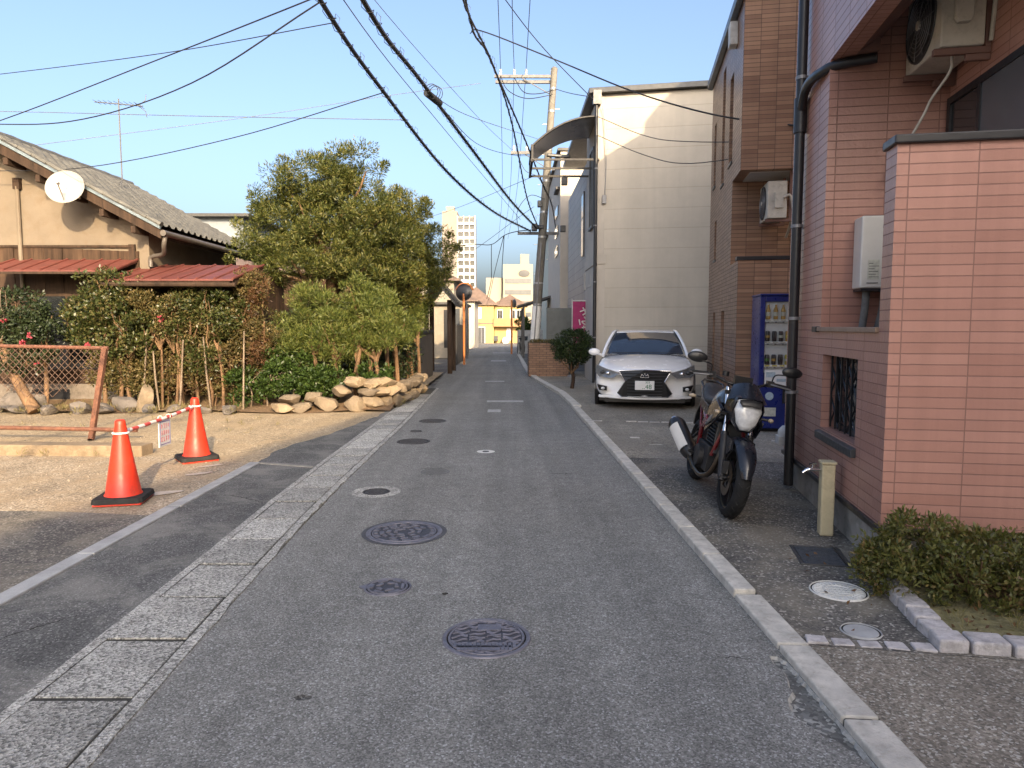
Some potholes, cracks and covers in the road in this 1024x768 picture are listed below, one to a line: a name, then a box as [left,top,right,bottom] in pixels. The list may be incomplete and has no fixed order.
manhole cover [351,486,401,498]
manhole cover [361,520,447,545]
manhole cover [809,580,869,602]
manhole cover [840,622,883,640]
manhole cover [790,545,852,567]
manhole cover [359,578,412,597]
manhole cover [442,618,531,659]
